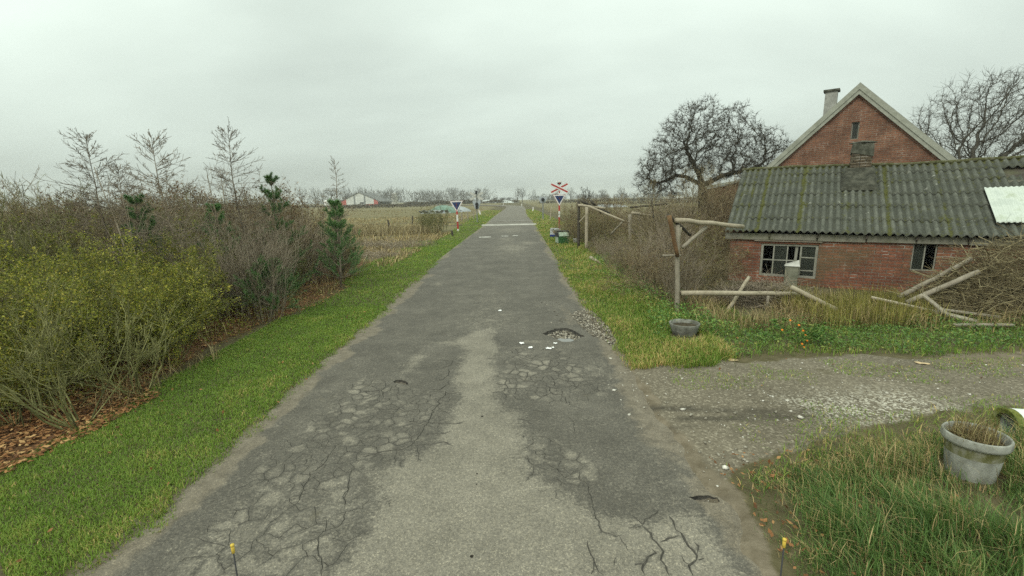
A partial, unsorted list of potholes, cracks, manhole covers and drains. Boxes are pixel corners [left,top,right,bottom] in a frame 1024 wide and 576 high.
pothole [542,328,584,342]
crack [488,349,704,576]
crack [178,360,465,576]
